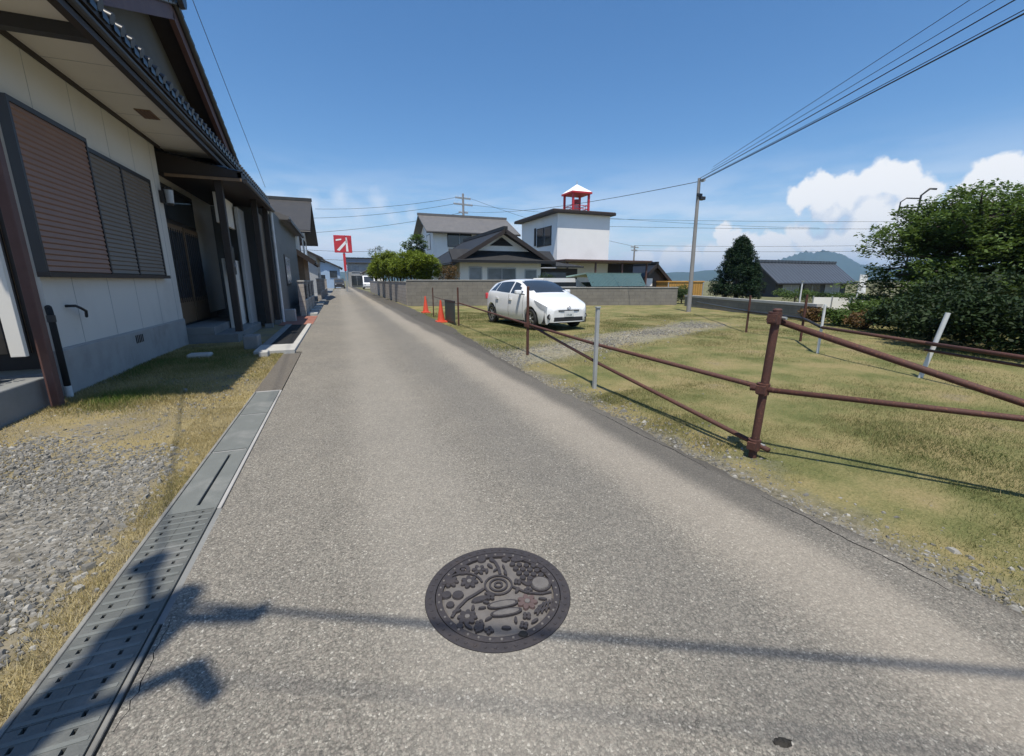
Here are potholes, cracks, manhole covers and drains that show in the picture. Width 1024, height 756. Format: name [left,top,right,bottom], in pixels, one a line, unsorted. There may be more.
crack [114,620,171,731]
pothole [773,737,792,748]
manhole cover [425,547,570,653]
crack [764,497,950,591]
